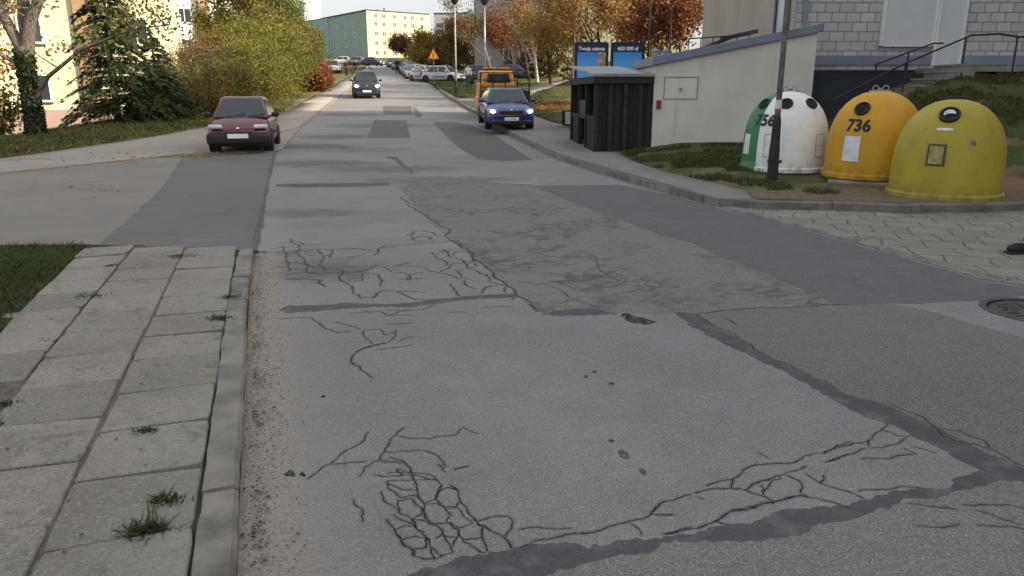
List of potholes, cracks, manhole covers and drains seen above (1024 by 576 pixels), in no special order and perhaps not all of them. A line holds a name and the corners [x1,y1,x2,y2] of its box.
pothole [620,313,656,325]
crack [273,230,513,378]
manhole cover [978,297,1024,322]
crack [308,404,1024,560]
